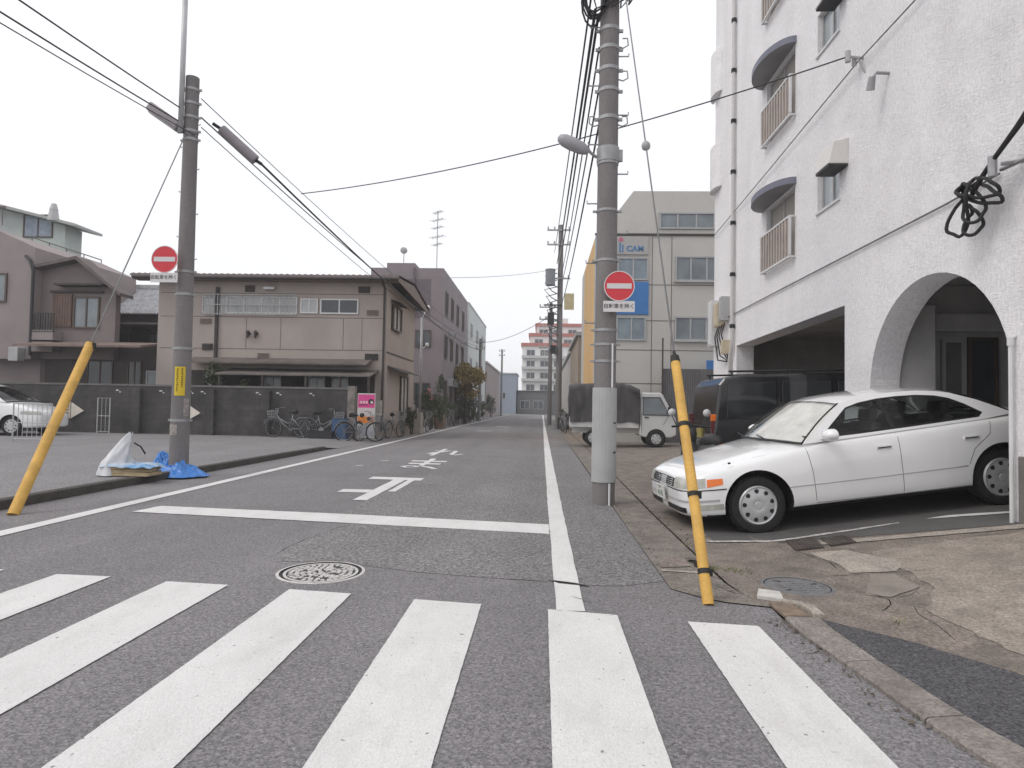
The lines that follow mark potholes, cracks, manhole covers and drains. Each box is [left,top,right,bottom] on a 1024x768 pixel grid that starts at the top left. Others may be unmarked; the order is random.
manhole cover [275,561,365,584]
manhole cover [760,576,836,596]
